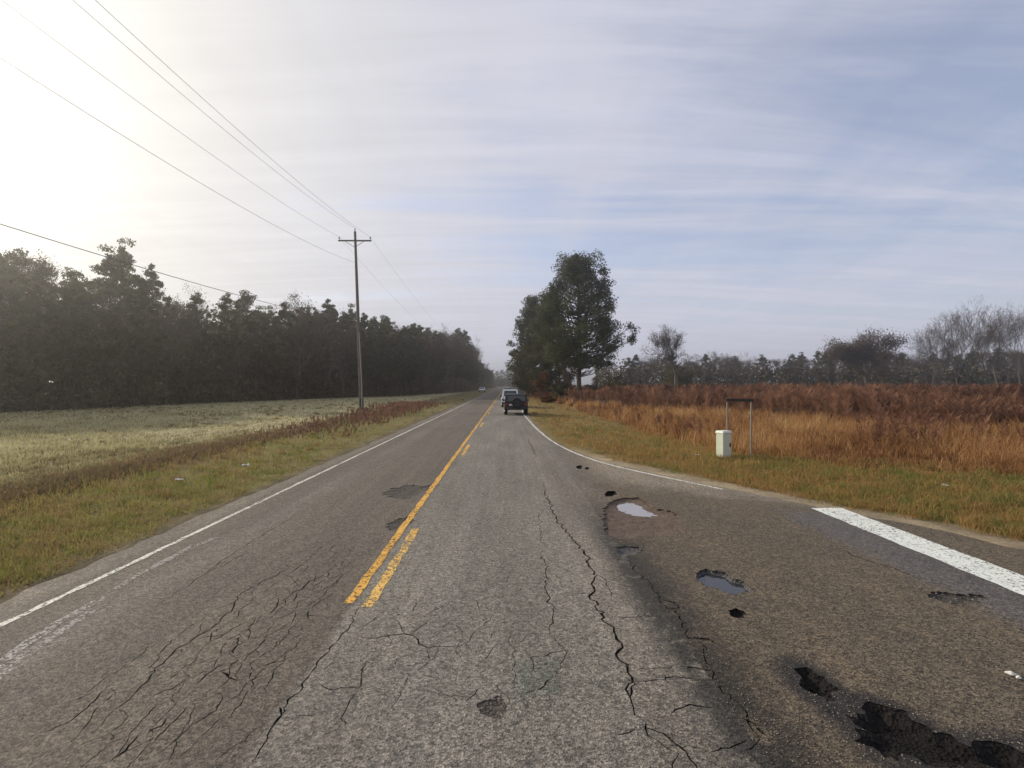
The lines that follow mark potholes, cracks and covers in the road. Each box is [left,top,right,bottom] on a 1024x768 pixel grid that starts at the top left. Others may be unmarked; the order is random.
pothole [926,591,990,605]
pothole [477,695,507,719]
pothole [602,497,683,539]
pothole [696,568,756,592]
crack [287,440,705,768]
pothole [728,608,746,618]
pothole [616,545,643,556]
pothole [845,701,1024,768]
crack [37,537,358,768]
pothole [794,667,840,702]
